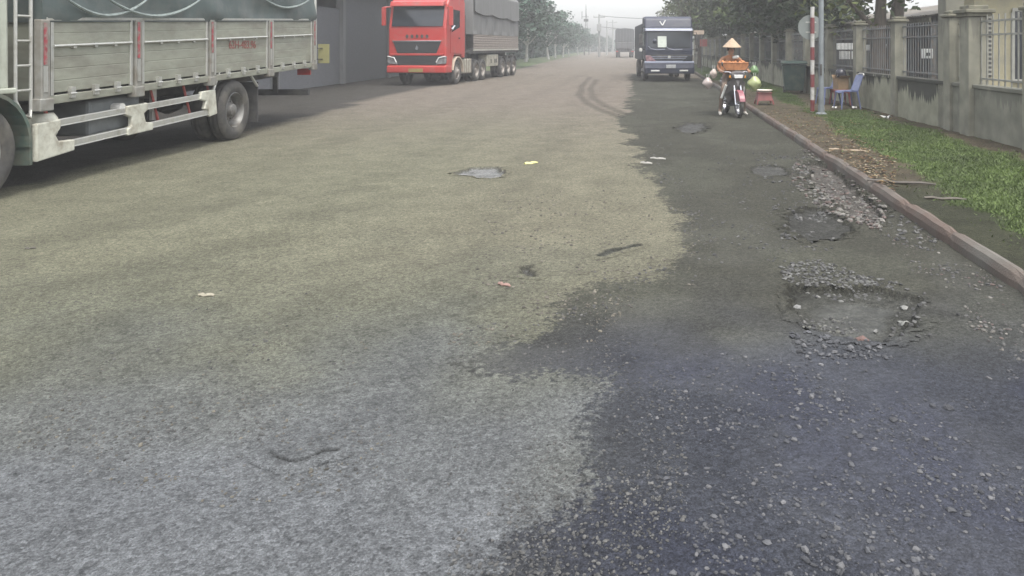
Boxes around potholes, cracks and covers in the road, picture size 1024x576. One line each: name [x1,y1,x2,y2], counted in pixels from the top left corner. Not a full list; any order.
pothole [668,121,716,134]
pothole [742,163,796,177]
pothole [773,281,943,347]
pothole [448,166,514,180]
crack [247,439,359,475]
pothole [769,204,861,244]
